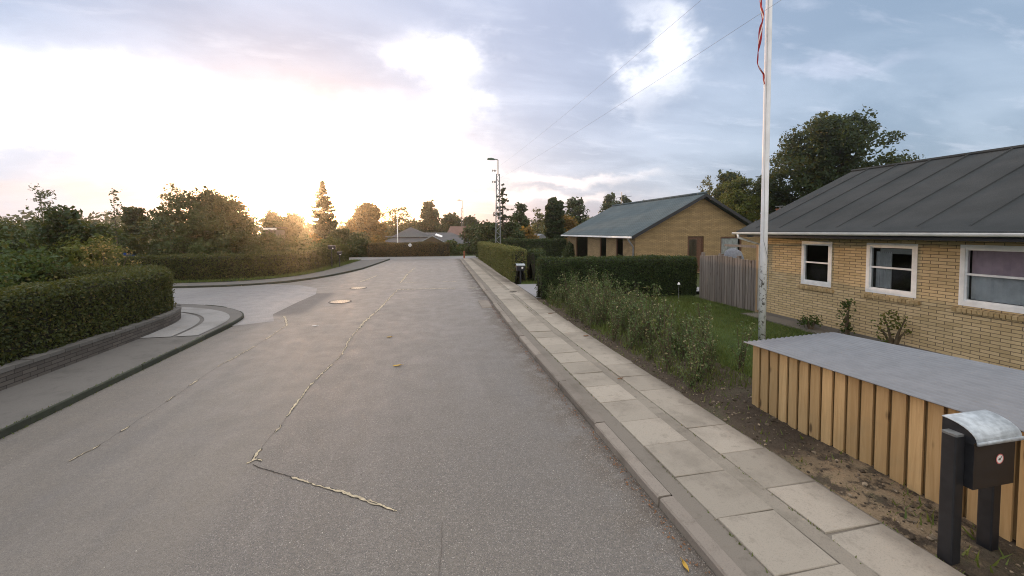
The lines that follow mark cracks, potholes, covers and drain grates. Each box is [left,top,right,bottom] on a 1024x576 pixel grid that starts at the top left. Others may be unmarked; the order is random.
crack [246,269,459,511]
crack [69,316,288,461]
